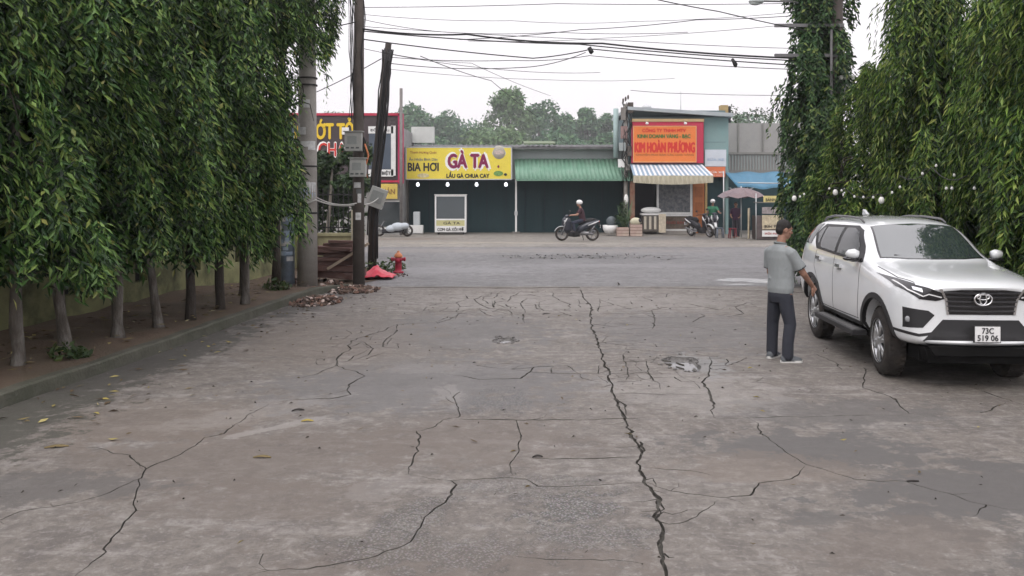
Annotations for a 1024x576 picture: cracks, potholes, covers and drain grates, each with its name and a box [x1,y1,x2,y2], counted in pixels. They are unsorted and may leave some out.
crack [0,407,264,576]
pothole [492,335,520,344]
pothole [657,353,706,372]
crack [249,282,1023,576]
